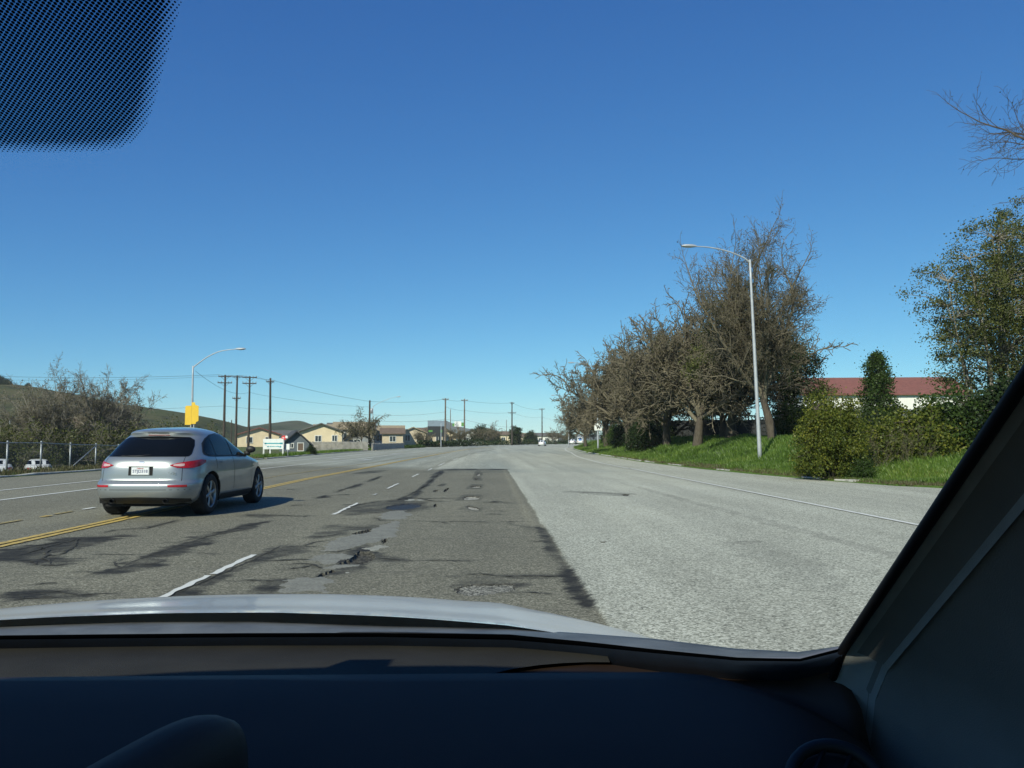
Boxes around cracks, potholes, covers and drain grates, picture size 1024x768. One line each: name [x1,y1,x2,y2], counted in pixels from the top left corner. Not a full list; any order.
pothole [454,583,518,596]
crack [78,470,442,594]
